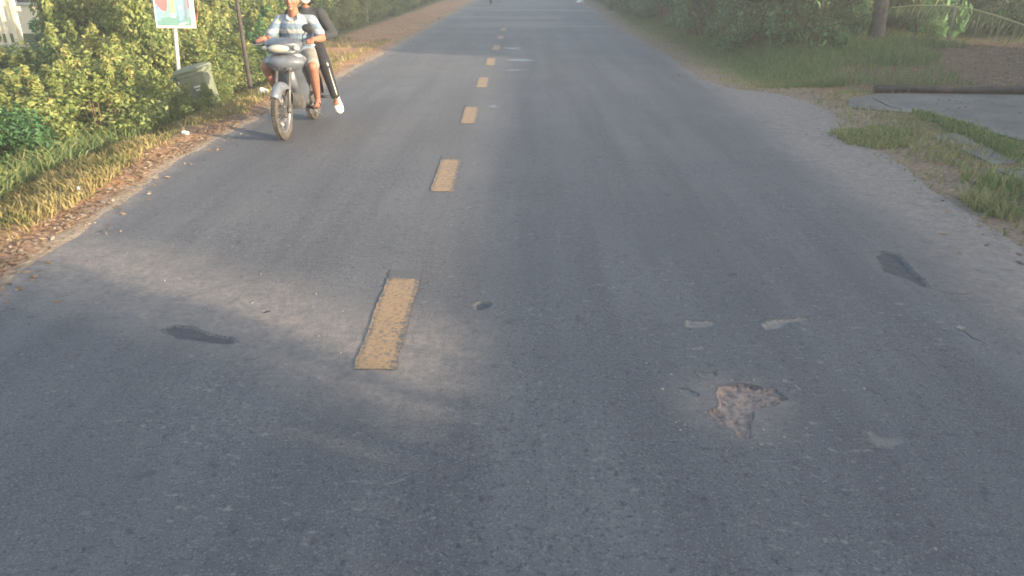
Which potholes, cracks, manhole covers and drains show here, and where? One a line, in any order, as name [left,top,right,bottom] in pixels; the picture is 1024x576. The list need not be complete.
pothole [863,425,910,449]
pothole [761,316,811,330]
pothole [684,318,715,328]
pothole [706,383,789,446]
pothole [473,301,493,310]
pothole [678,387,700,397]
